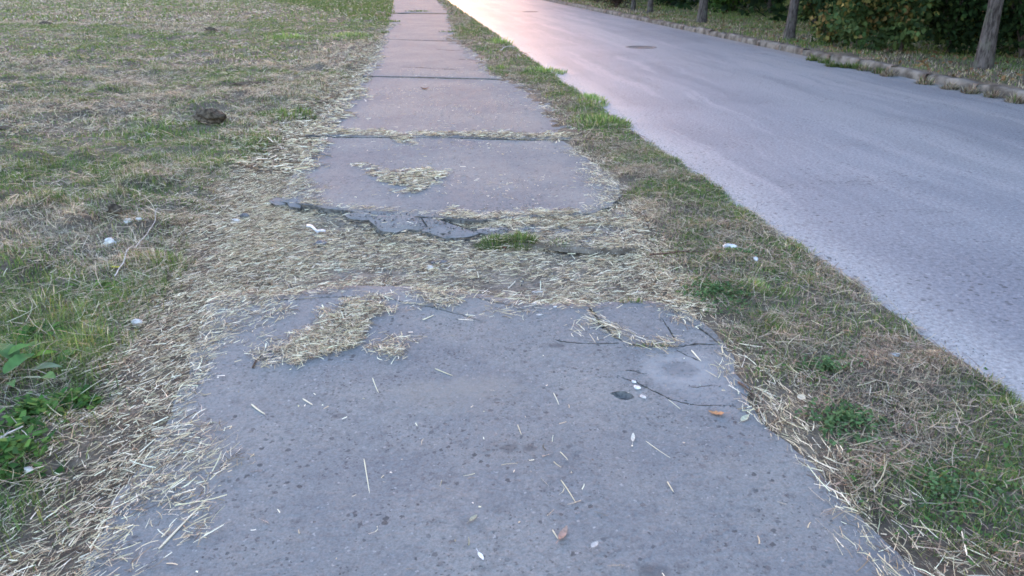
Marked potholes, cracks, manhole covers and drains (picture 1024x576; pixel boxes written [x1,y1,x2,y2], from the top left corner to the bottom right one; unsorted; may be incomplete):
crack [626,370,716,406]
pothole [273,212,644,304]
crack [555,308,725,361]
